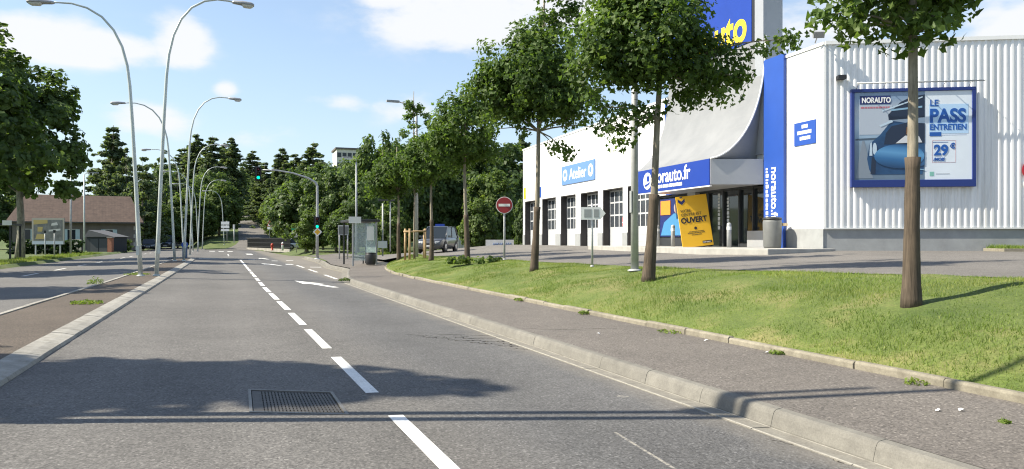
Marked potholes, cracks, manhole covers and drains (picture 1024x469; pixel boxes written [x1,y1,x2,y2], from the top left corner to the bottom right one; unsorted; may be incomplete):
drain grate [248,389,349,415]
crack [407,334,518,349]
